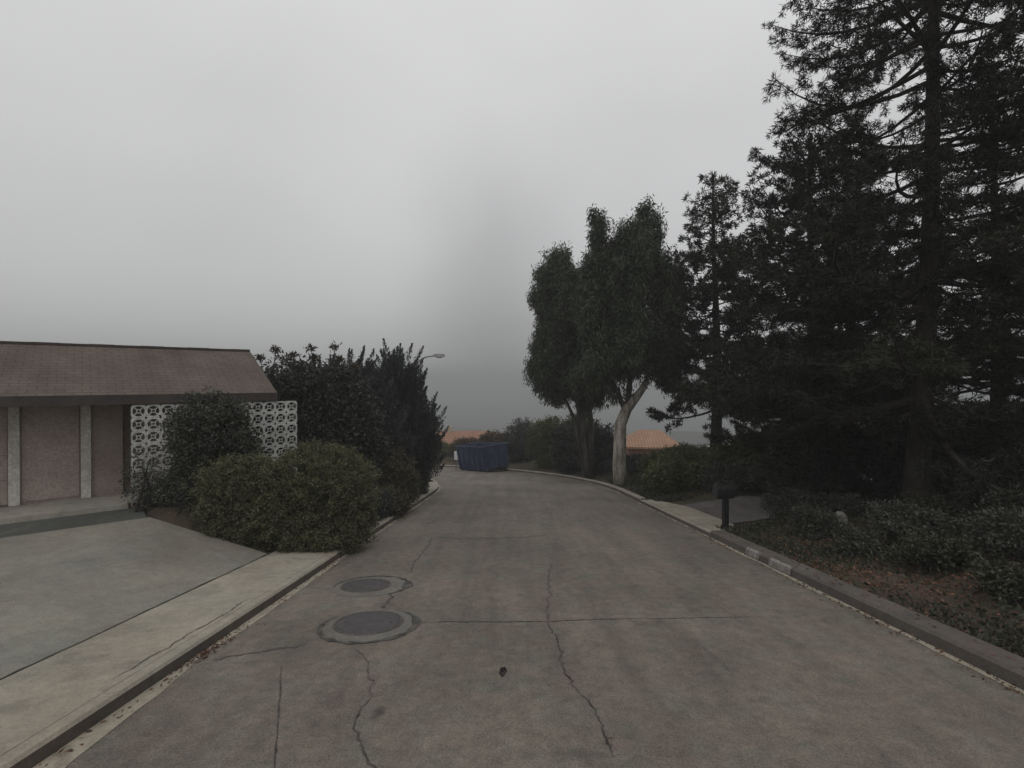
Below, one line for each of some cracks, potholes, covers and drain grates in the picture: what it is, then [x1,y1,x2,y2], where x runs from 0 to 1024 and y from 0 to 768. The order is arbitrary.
crack [113,600,245,679]
manhole cover [332,575,413,597]
crack [352,649,377,768]
crack [436,564,751,755]
crack [213,643,307,768]
manhole cover [316,610,422,644]
